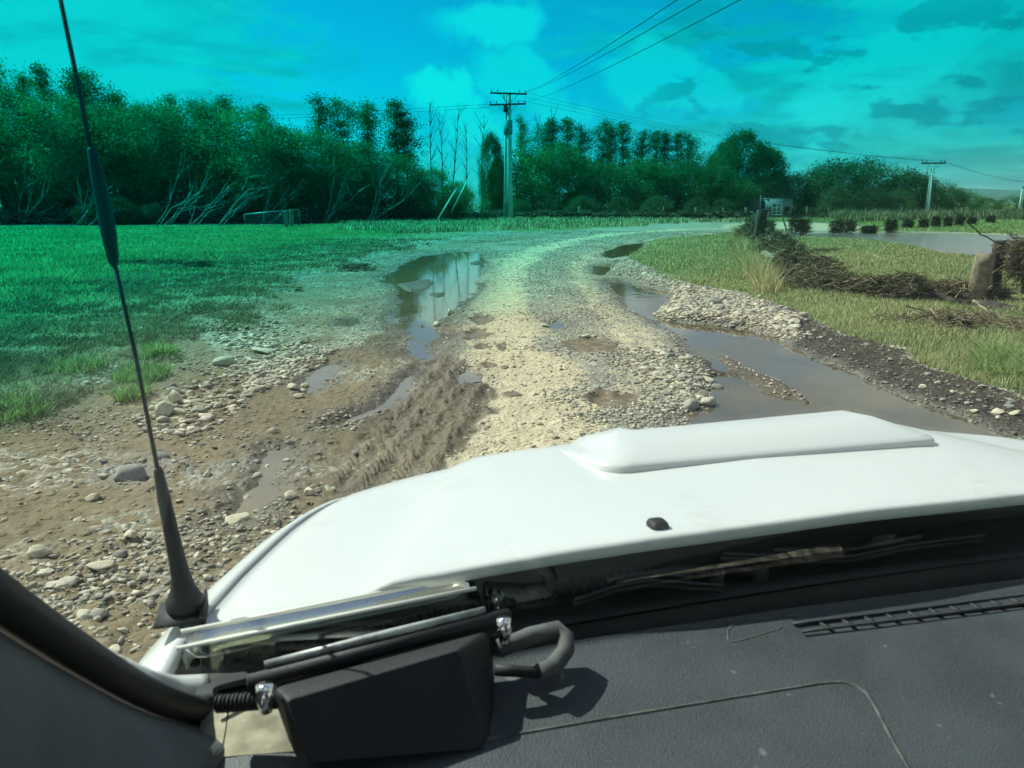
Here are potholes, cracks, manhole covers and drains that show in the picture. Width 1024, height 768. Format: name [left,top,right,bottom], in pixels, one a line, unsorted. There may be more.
pothole [580,388,640,408]
pothole [378,252,485,360]
pothole [469,312,495,325]
pothole [234,449,295,518]
pothole [461,327,496,340]
pothole [560,336,630,354]
